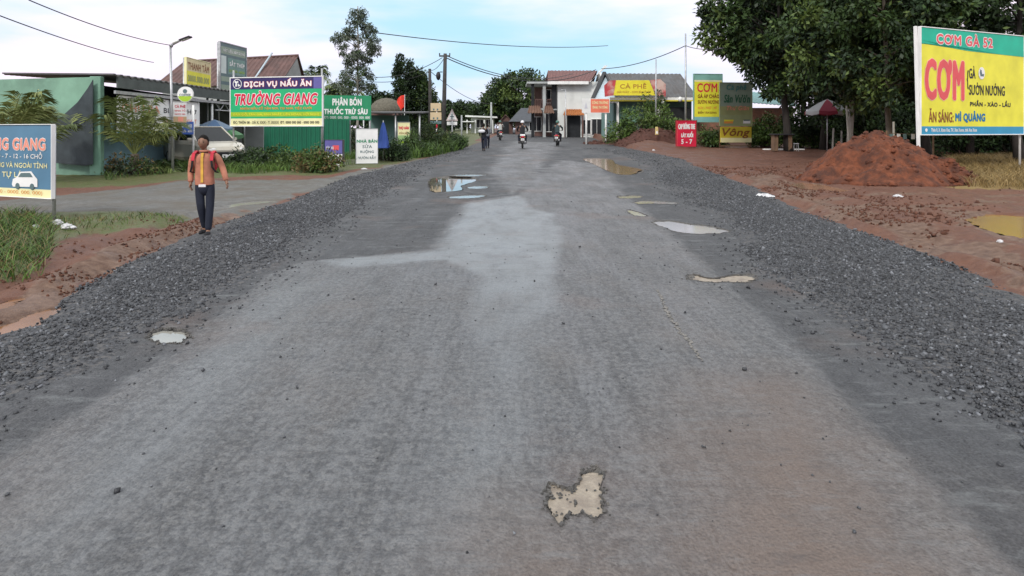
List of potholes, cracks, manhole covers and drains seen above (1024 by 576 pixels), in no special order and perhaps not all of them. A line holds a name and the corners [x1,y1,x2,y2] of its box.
pothole [427,176,477,193]
pothole [144,327,195,345]
pothole [651,220,732,235]
pothole [681,273,765,284]
pothole [540,463,611,527]
crack [656,290,703,361]
pothole [582,158,644,175]
